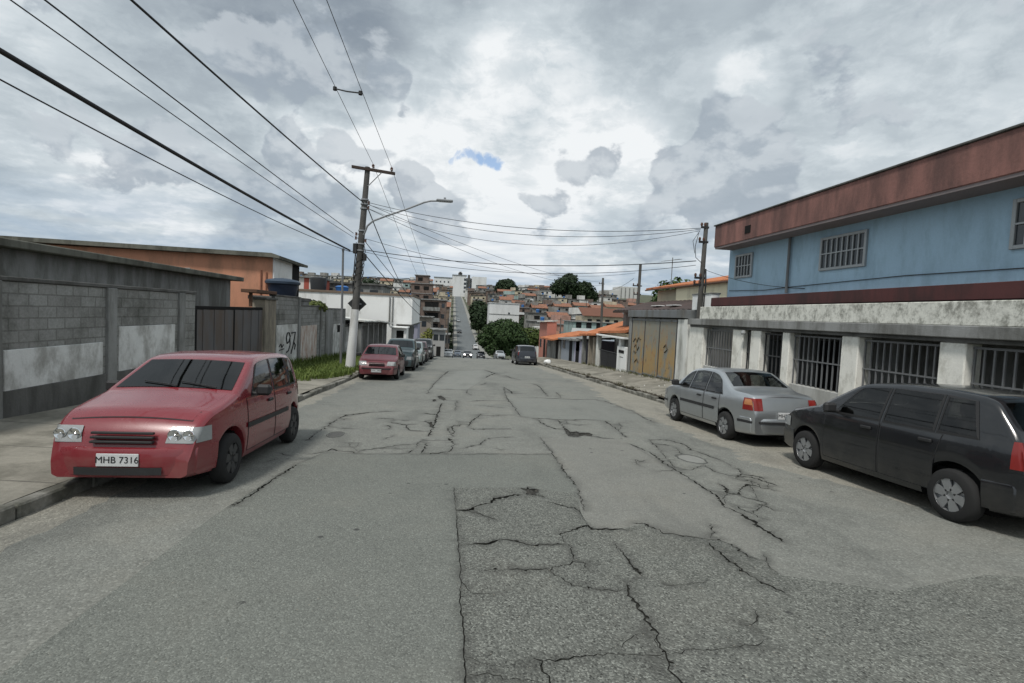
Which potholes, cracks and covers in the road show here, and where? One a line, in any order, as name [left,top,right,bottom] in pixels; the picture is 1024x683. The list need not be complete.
crack [536,418,626,439]
pothole [564,428,593,437]
crack [709,543,785,593]
crack [328,370,516,454]
crack [454,488,763,683]
manhole cover [675,454,708,464]
